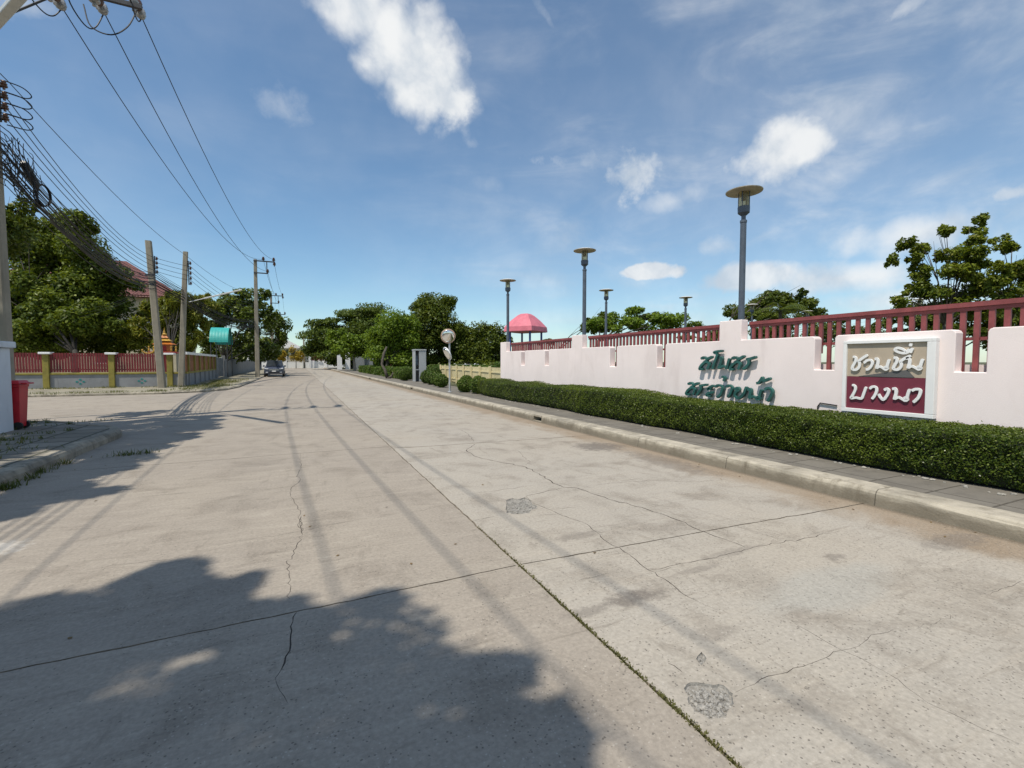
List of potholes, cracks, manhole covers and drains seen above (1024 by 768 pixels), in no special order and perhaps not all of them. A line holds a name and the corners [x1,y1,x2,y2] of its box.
crack [465,432,838,608]
crack [750,615,1021,745]
crack [131,457,434,703]
